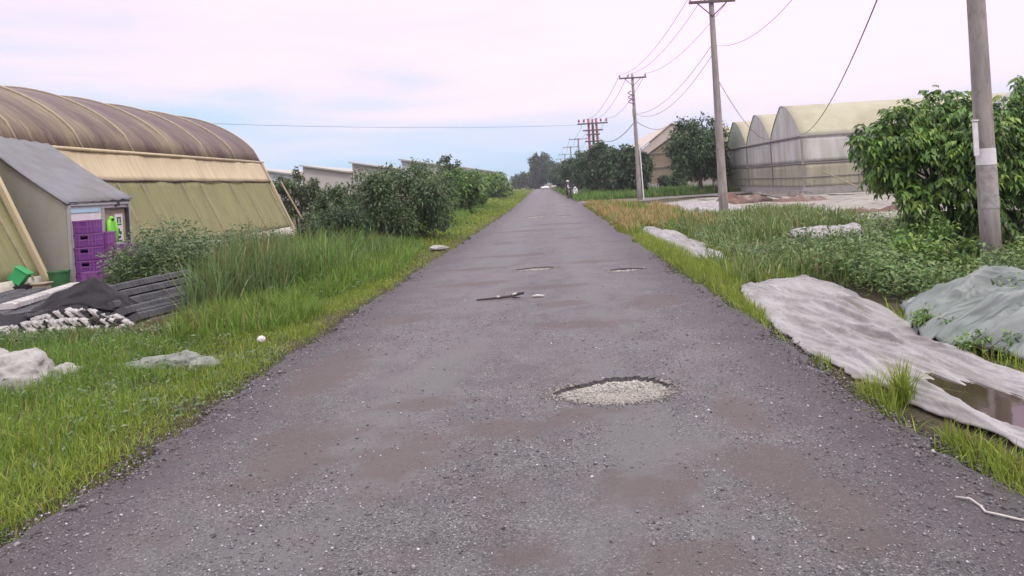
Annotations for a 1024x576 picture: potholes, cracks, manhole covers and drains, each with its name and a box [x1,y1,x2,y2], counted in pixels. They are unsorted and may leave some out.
pothole [537,376,696,409]
